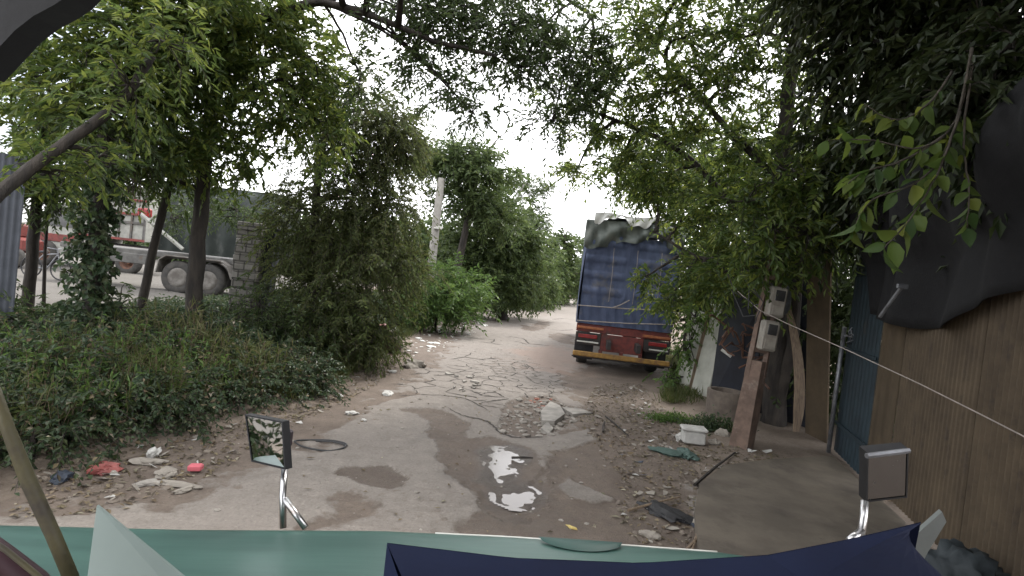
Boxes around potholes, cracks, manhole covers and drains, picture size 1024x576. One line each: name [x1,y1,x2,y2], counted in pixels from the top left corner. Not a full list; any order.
pothole [497,394,578,438]
crack [399,318,572,438]
